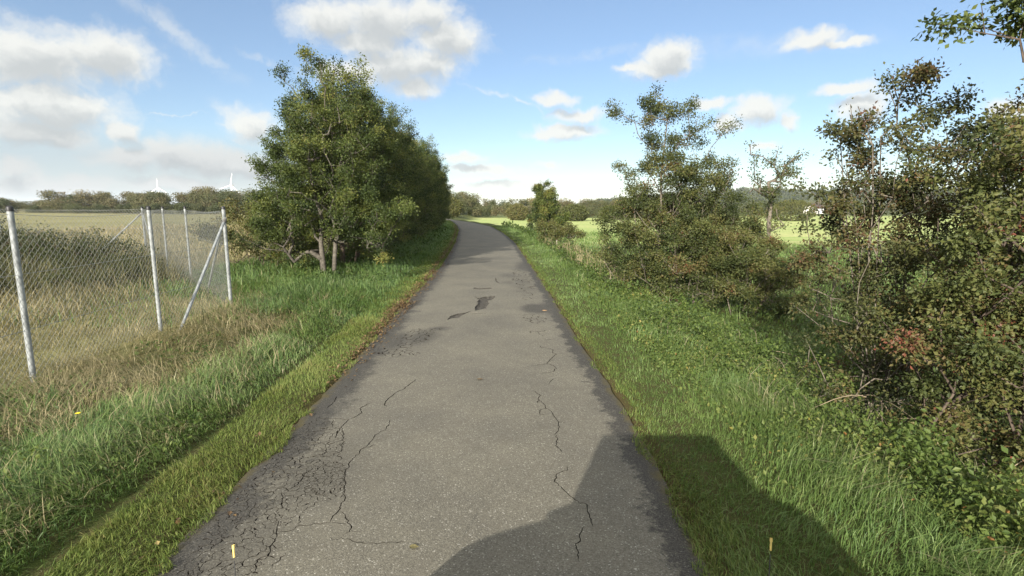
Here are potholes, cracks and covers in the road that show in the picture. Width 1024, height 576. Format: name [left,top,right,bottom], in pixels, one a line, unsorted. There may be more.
crack [496,270,593,561]
crack [177,403,403,576]
pothole [475,296,495,311]
crack [374,328,441,357]
